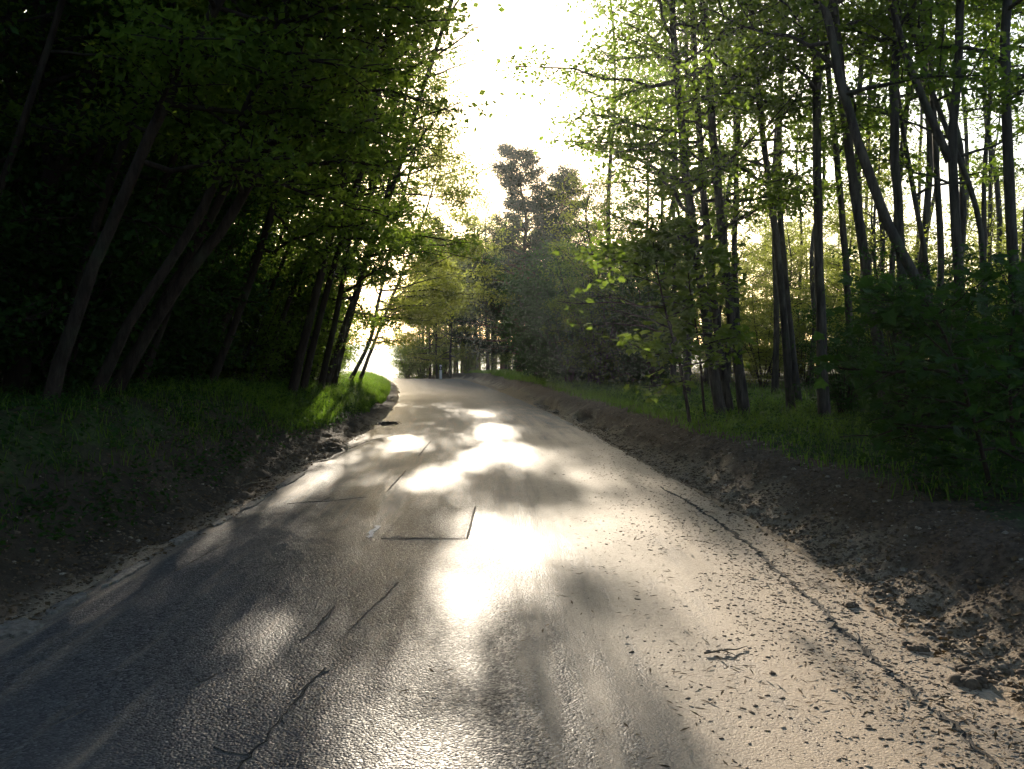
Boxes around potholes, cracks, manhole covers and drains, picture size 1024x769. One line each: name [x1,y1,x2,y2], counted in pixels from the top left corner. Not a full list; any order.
crack [387,441,431,491]
crack [300,582,399,642]
crack [661,487,1001,769]
